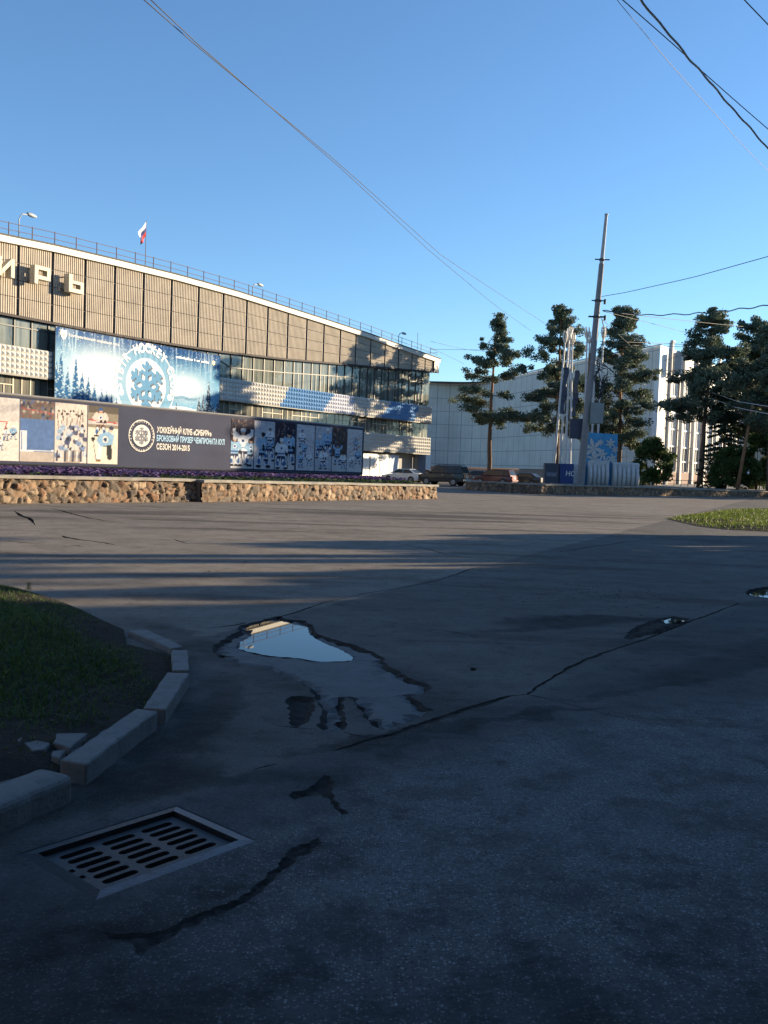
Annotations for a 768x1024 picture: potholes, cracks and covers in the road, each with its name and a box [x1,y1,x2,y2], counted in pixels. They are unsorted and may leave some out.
drain grate [20,806,255,900]
pothole [212,616,434,732]
crack [9,511,37,544]
pothole [746,587,768,598]
pothole [289,775,349,815]
crack [333,603,738,751]
pothole [623,616,689,640]
